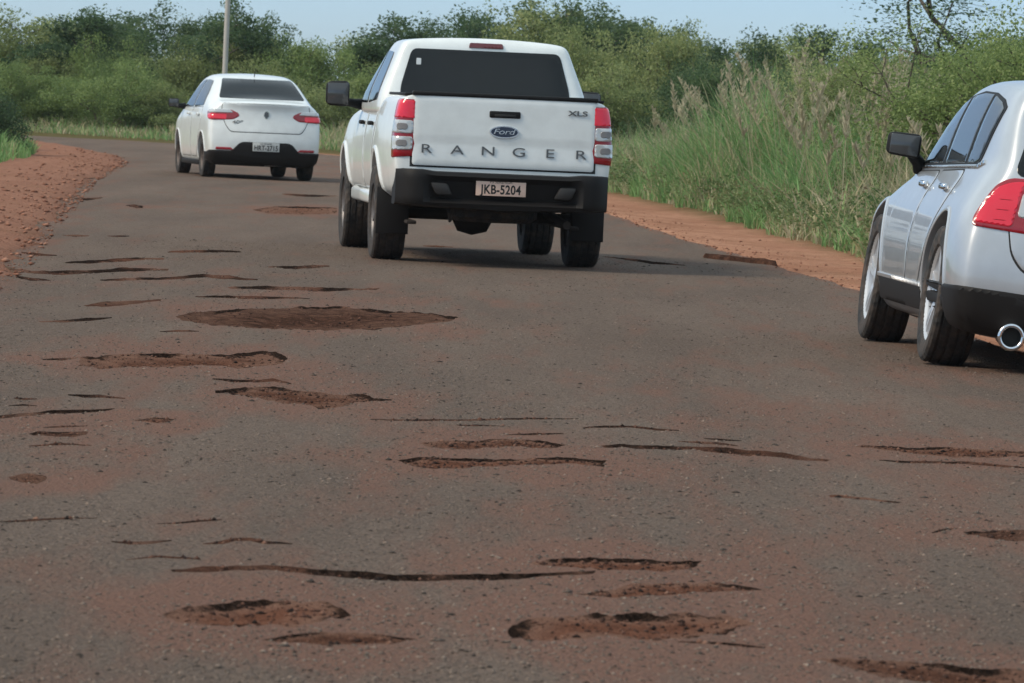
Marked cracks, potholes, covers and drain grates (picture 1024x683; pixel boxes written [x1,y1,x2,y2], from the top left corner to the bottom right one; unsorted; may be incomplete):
crack [111,519,596,581]
crack [9,235,379,299]
pothole [263,632,417,645]
pothole [175,306,458,331]
crack [372,418,829,462]
pothole [253,206,337,215]
crack [0,394,125,418]
pothole [213,378,392,409]
pothole [577,582,762,598]
pothole [9,473,47,484]
pothole [531,557,701,572]
pothole [932,528,1024,541]
